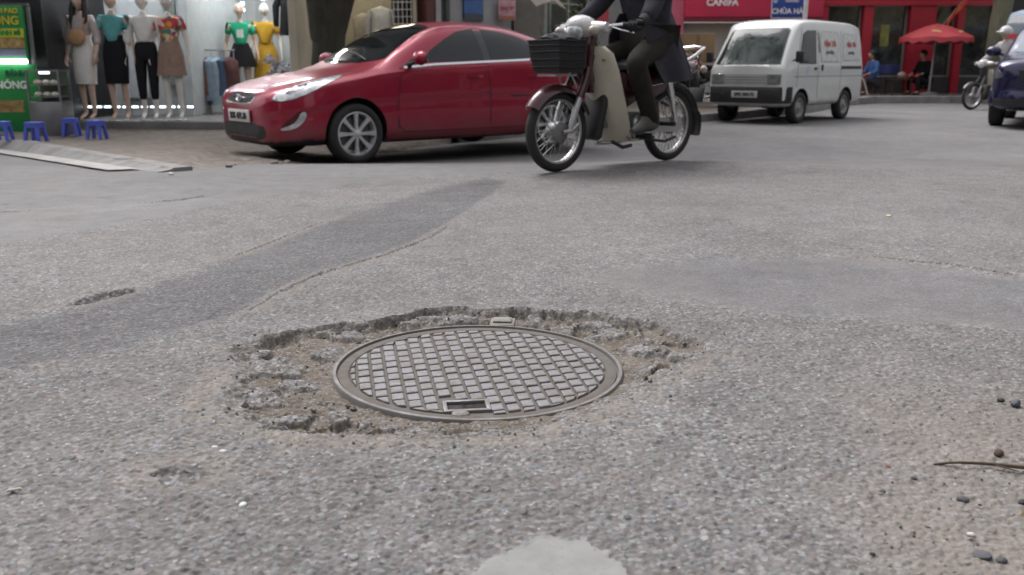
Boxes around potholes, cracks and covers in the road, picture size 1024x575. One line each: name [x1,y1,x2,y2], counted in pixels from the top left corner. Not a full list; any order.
manhole cover [332,317,623,423]
crack [230,217,457,311]
pothole [66,287,139,307]
pothole [216,306,720,440]
pothole [148,461,208,488]
crack [871,255,1019,277]
